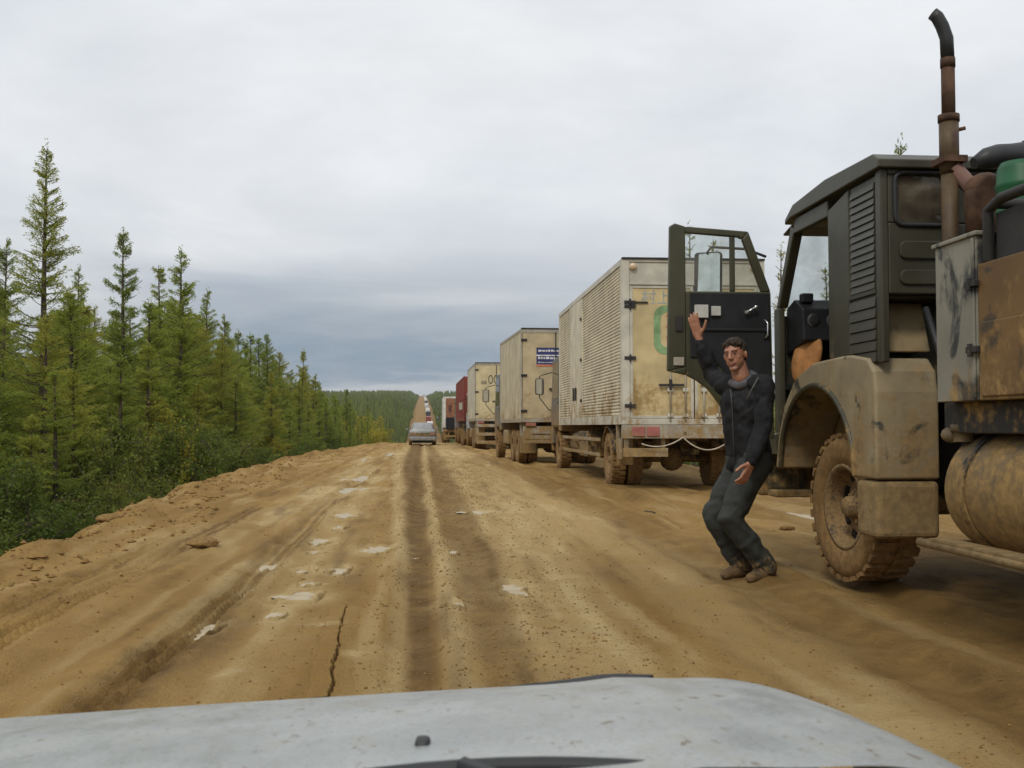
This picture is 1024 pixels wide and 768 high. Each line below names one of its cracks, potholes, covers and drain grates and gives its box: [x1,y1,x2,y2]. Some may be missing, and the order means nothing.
pothole [265,590,327,605]
pothole [189,619,228,644]
pothole [495,578,531,598]
pothole [262,608,288,621]
crack [306,604,362,698]
